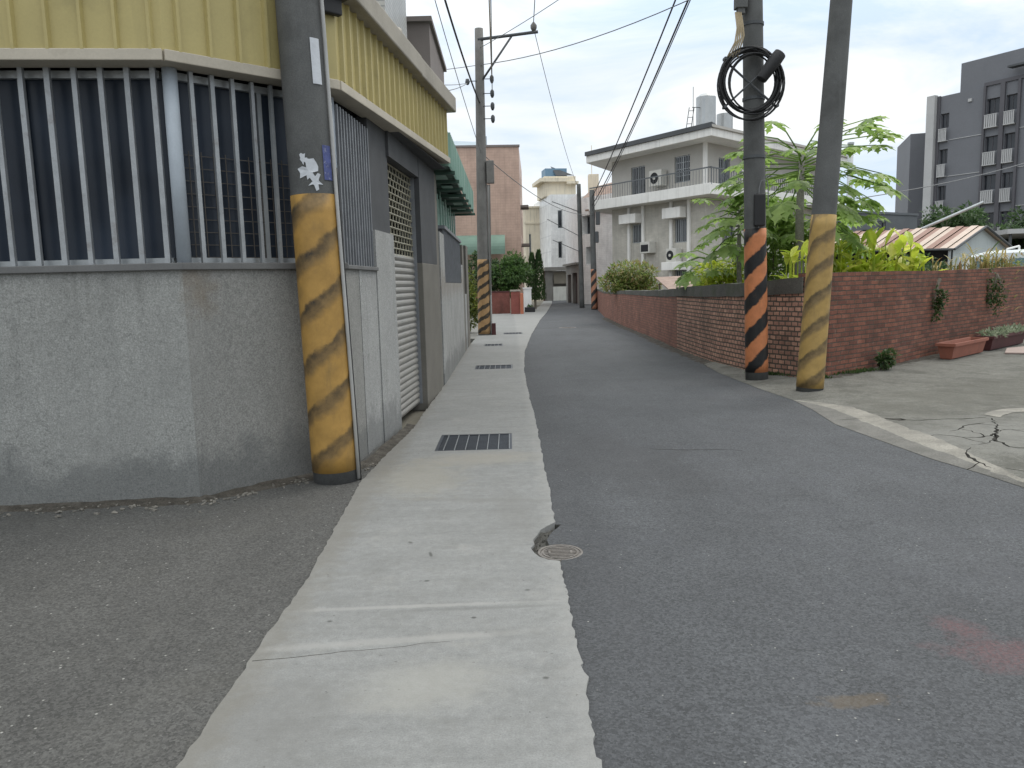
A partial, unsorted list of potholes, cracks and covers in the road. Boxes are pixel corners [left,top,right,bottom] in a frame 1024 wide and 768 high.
crack [884,417,1018,470]
manhole cover [538,544,583,563]
pothole [532,524,560,559]
drain grate [435,433,512,451]
